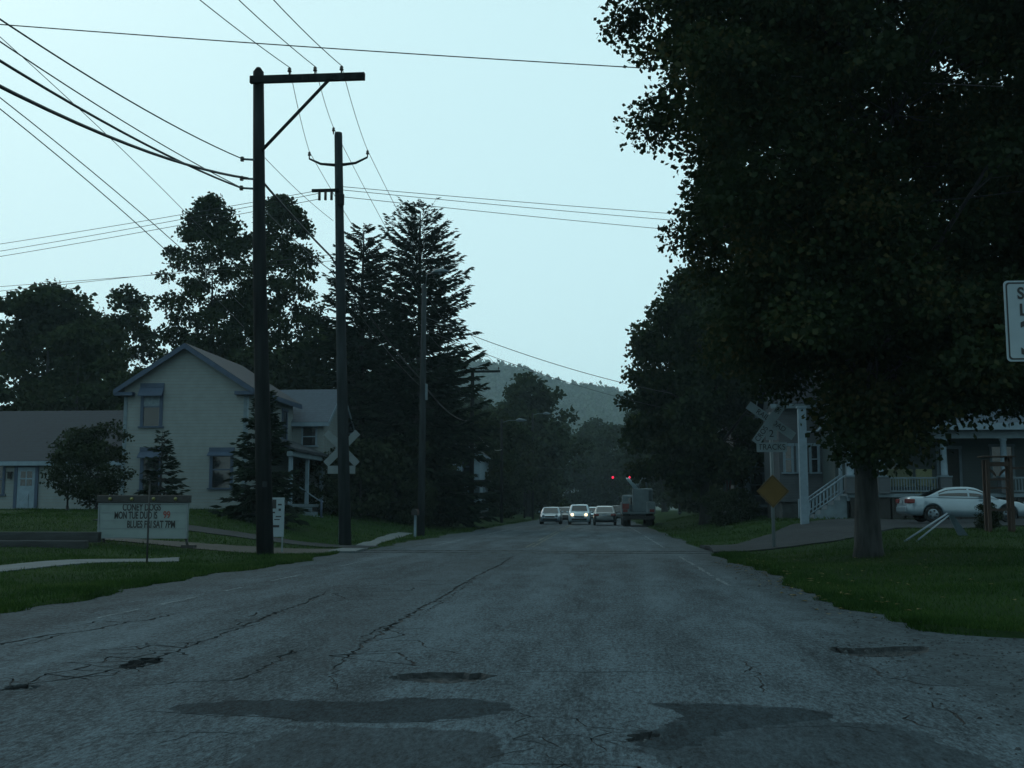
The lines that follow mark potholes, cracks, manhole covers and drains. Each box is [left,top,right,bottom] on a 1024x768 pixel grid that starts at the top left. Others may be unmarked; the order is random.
crack [740,660,769,694]
crack [490,713,681,768]
pothole [383,672,497,684]
pothole [829,646,929,657]
crack [0,580,467,691]
pothole [3,682,41,691]
